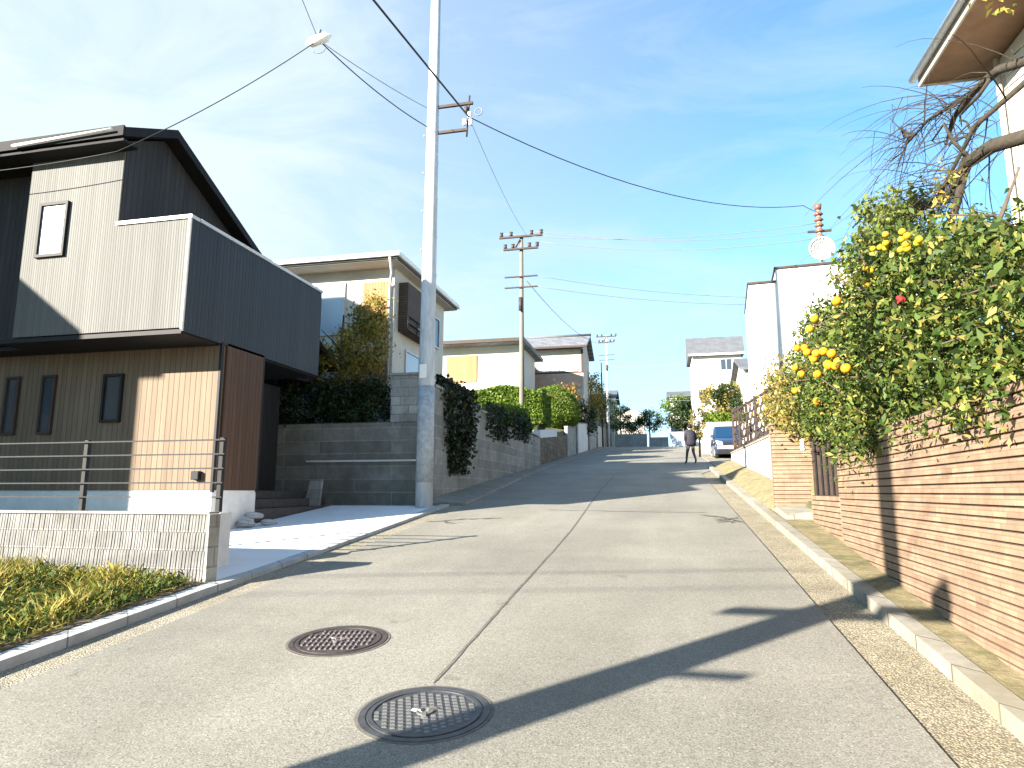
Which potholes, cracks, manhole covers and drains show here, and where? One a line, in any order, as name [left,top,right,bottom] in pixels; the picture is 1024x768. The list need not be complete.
manhole cover [285,625,390,658]
manhole cover [354,686,494,745]
